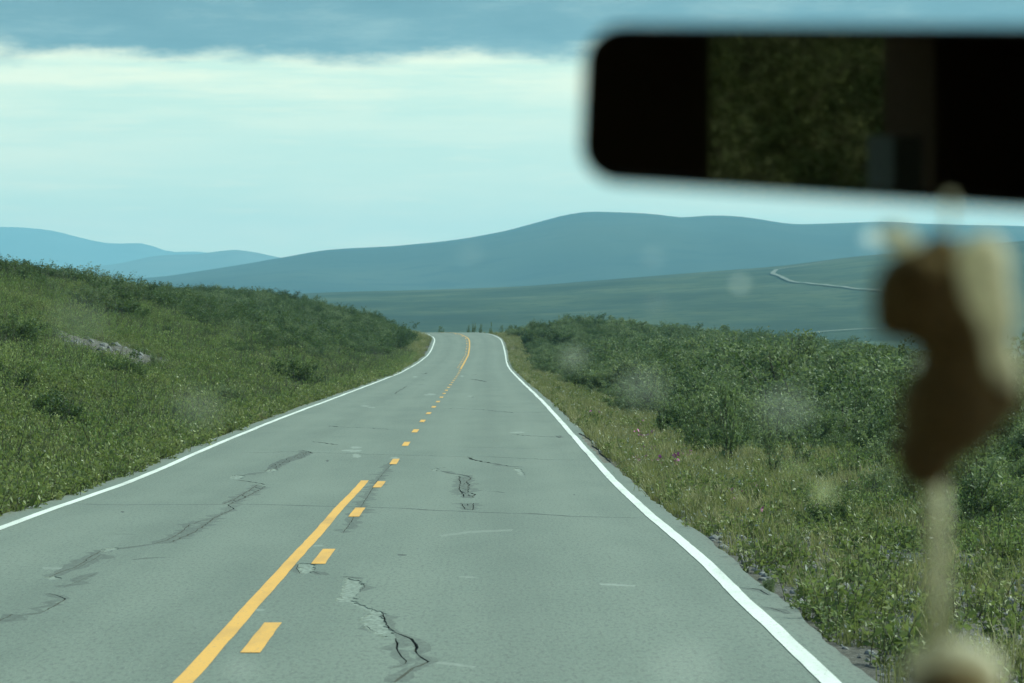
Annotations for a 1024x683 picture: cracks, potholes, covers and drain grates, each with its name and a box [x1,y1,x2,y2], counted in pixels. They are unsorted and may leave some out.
crack [335,577,429,682]
crack [0,426,626,621]
